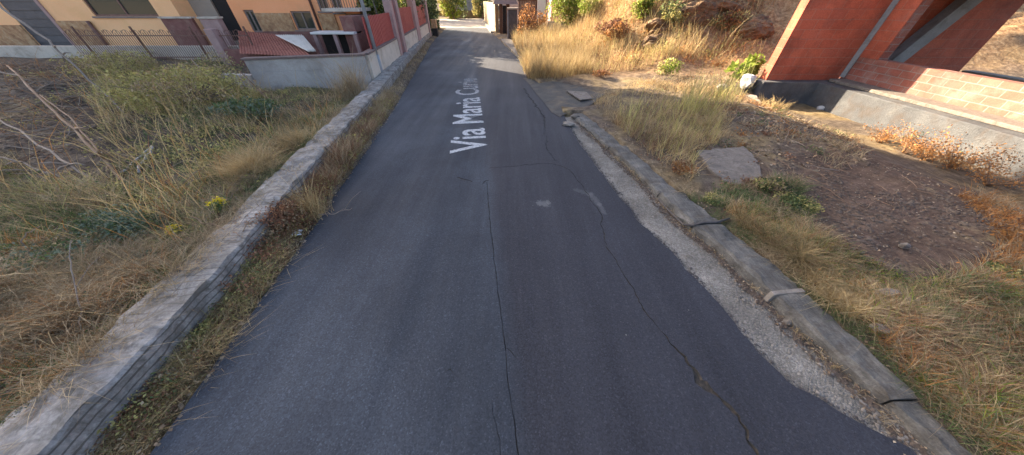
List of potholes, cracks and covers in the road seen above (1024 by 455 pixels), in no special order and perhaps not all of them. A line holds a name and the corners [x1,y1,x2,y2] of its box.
crack [458,177,519,455]
crack [494,88,759,455]
